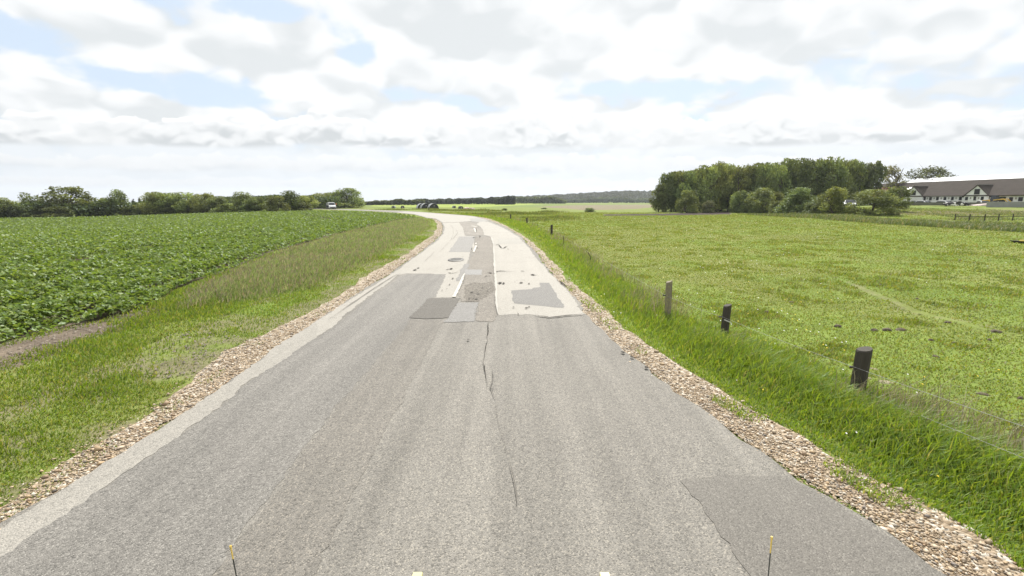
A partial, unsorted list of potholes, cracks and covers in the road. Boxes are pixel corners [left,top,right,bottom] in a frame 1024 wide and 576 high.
crack [483,322,517,497]
